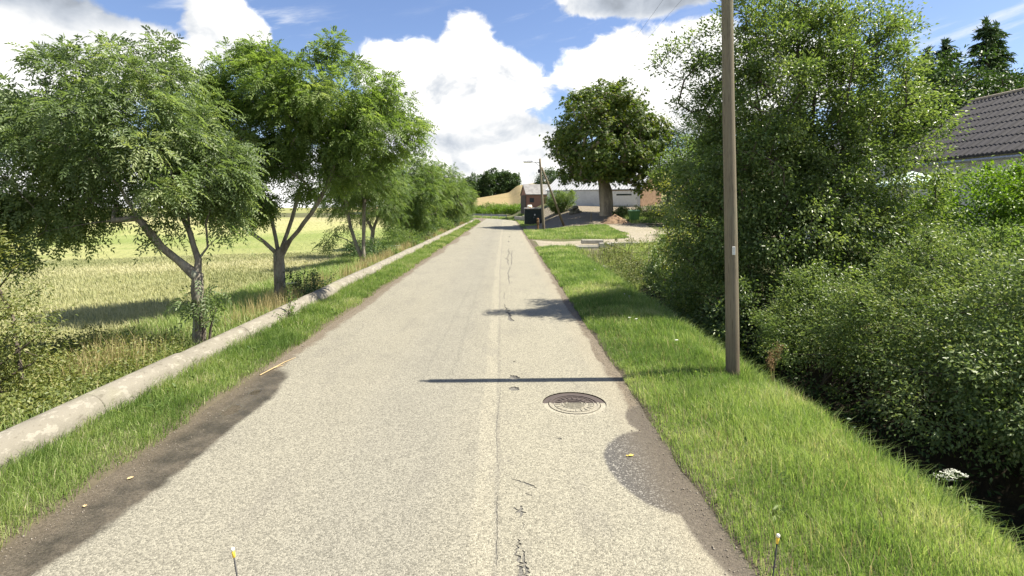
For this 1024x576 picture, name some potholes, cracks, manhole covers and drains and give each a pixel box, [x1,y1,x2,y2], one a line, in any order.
manhole cover [543,393,606,416]
crack [495,479,537,576]
